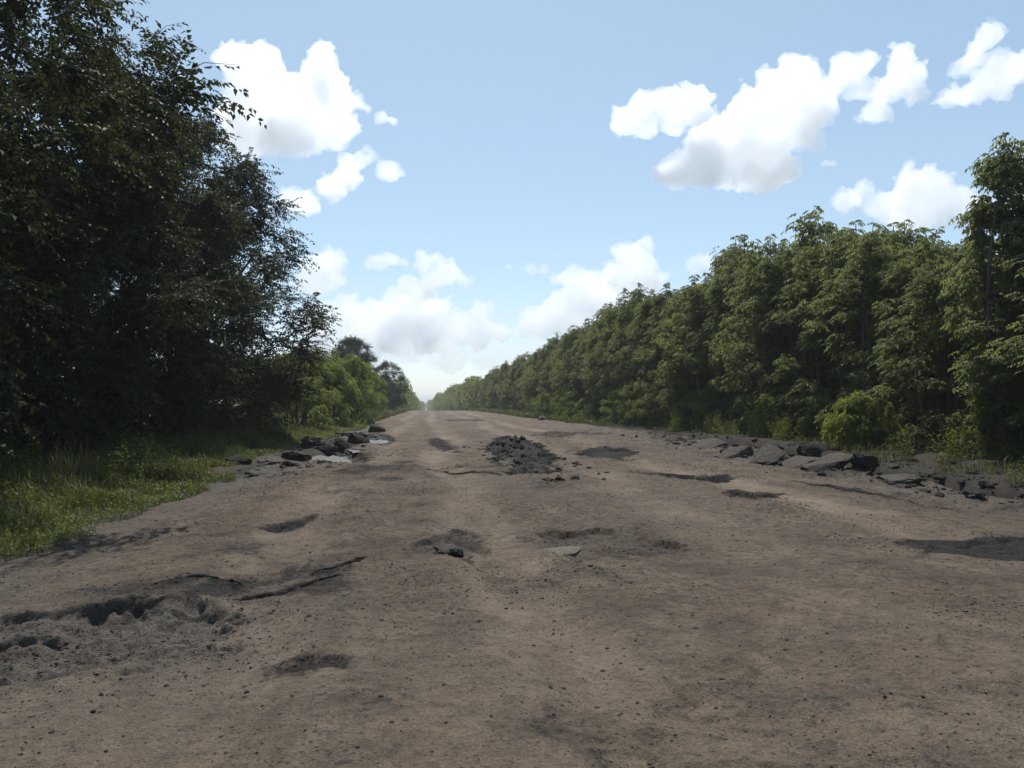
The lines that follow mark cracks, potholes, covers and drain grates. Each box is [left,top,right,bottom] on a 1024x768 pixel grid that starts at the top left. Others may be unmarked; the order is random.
crack [165,556,367,601]
pothole [0,595,276,687]
pothole [255,652,358,679]
pothole [658,473,736,484]
crack [426,468,505,476]
pothole [309,444,377,464]
pothole [409,528,493,564]
pothole [424,438,464,455]
pothole [509,526,688,560]
pothole [719,489,788,499]
pothole [253,512,324,534]
crack [786,480,961,511]
